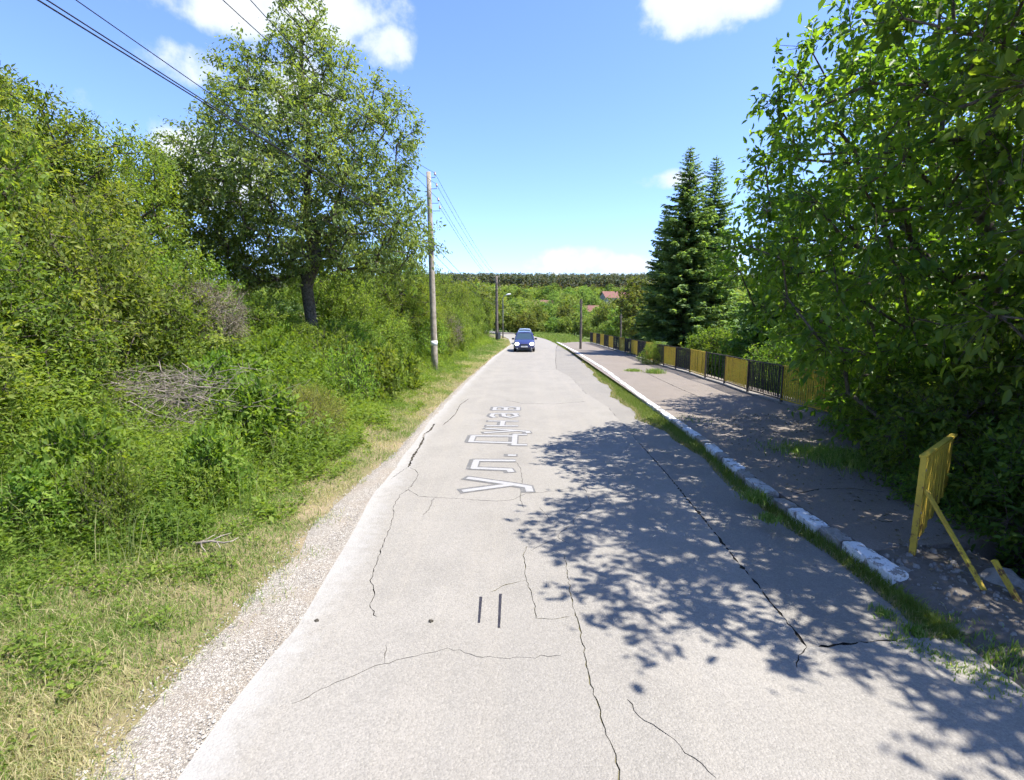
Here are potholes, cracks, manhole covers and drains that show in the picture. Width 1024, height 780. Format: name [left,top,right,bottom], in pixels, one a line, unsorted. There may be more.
crack [627,699,716,778]
crack [293,647,558,704]
crack [369,399,620,780]
